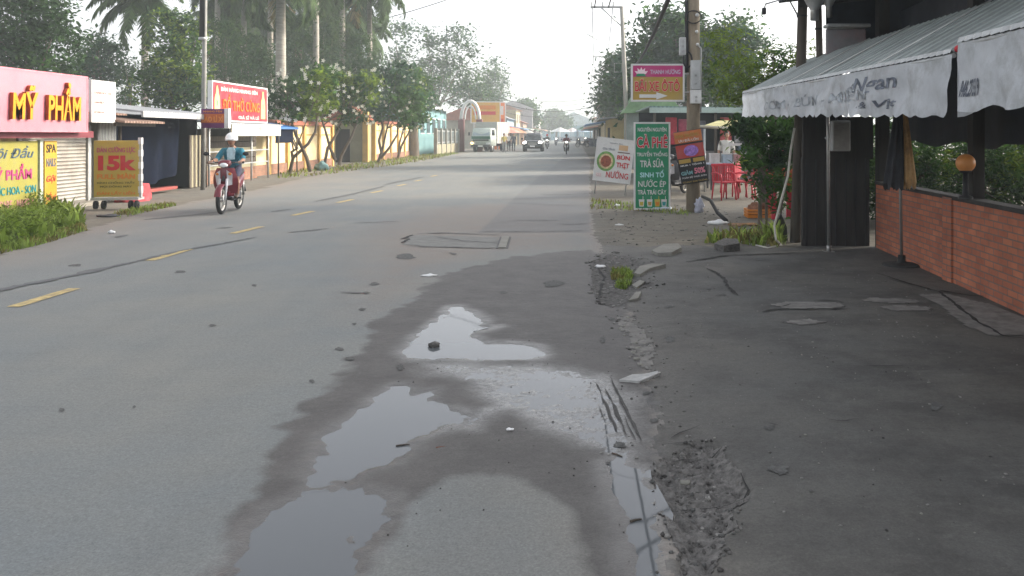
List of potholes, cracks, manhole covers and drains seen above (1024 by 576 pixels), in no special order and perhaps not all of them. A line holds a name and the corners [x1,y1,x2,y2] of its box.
crack [707,268,738,295]
crack [878,273,1021,338]
crack [597,267,606,297]
pothole [649,439,749,576]
manhole cover [496,236,511,249]
